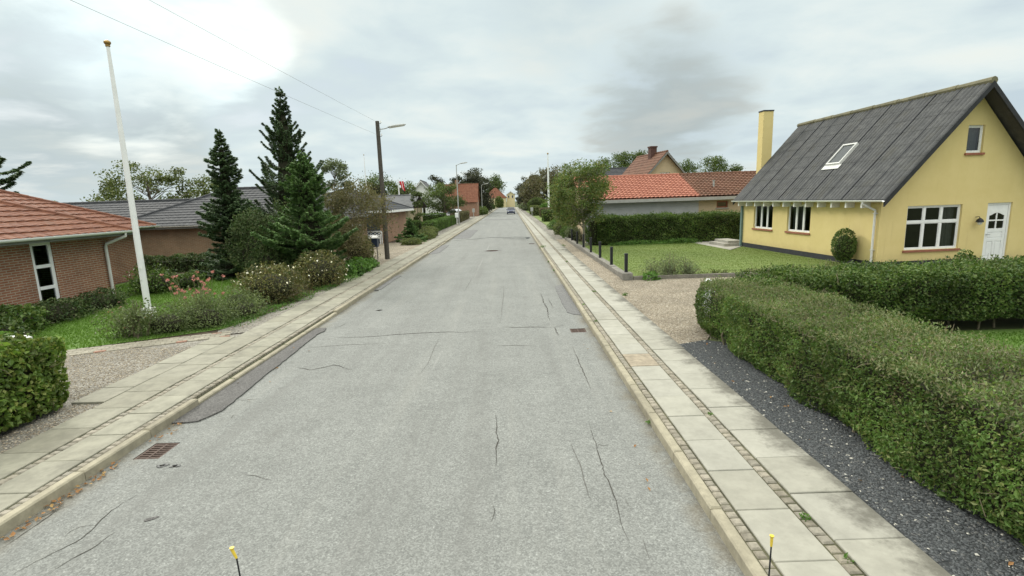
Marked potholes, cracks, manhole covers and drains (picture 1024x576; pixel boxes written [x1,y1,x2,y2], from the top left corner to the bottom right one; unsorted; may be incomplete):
drain grate [133,442,180,460]
crack [17,497,133,572]
crack [571,427,628,534]
crack [541,295,589,384]
